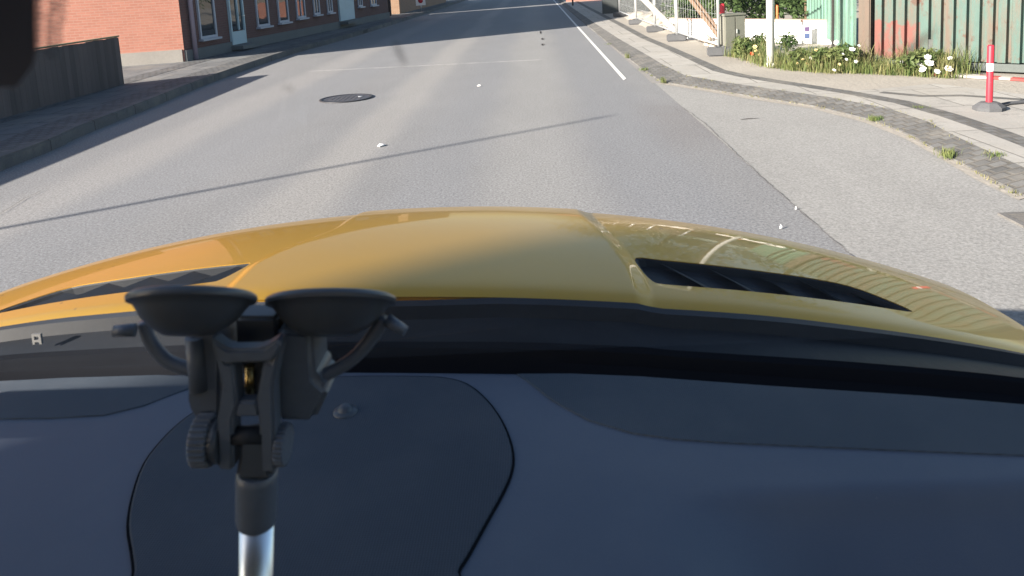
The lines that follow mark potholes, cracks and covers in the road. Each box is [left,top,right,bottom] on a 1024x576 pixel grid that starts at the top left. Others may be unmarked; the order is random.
drain grate [998,211,1024,228]
manhole cover [319,94,373,103]
